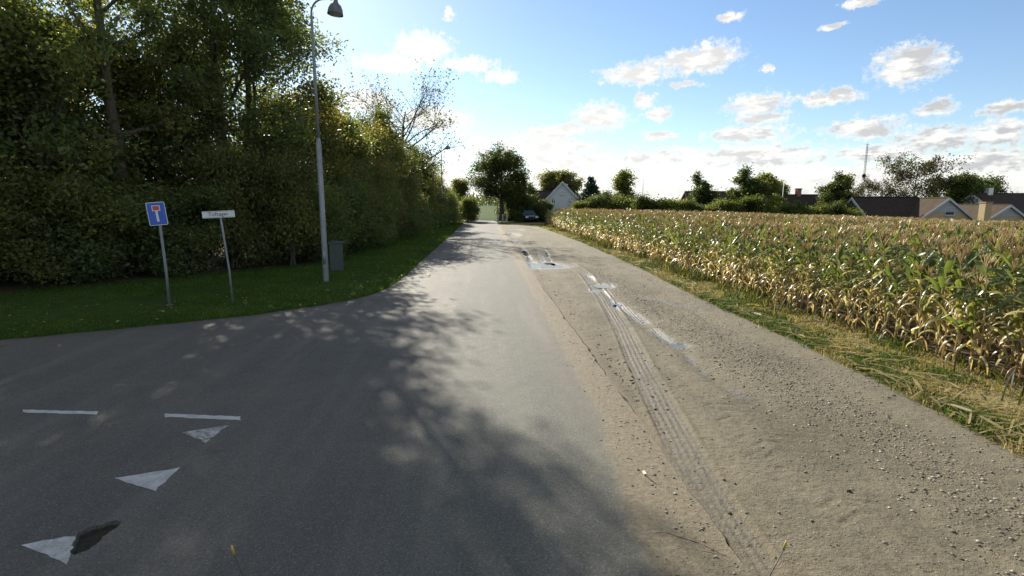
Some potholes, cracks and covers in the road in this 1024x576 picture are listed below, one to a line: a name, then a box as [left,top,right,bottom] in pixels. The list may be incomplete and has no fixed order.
pothole [70,520,121,555]
